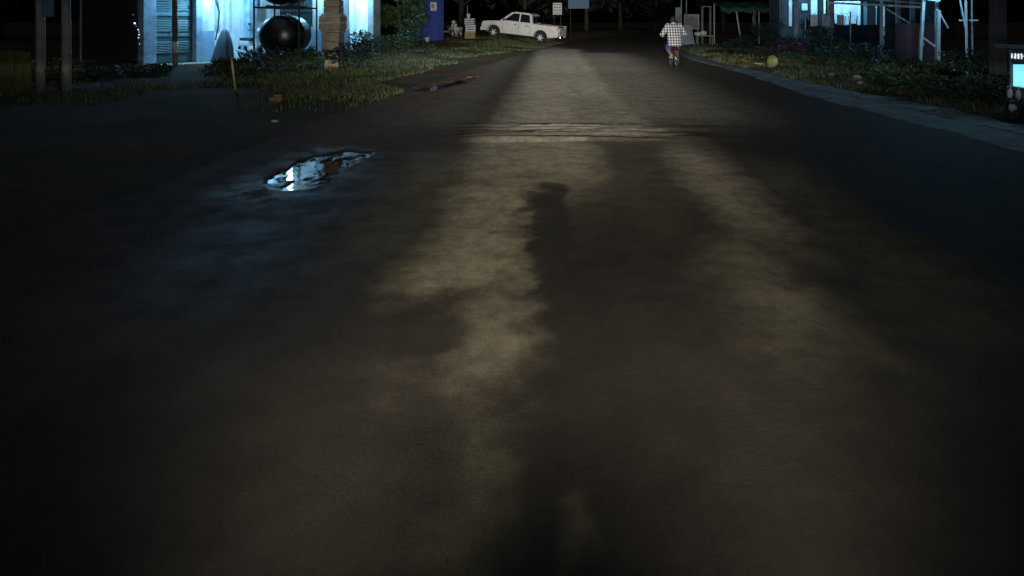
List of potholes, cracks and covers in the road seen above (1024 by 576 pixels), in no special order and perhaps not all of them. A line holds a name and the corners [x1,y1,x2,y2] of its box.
pothole [253,148,382,193]
pothole [408,76,482,92]
